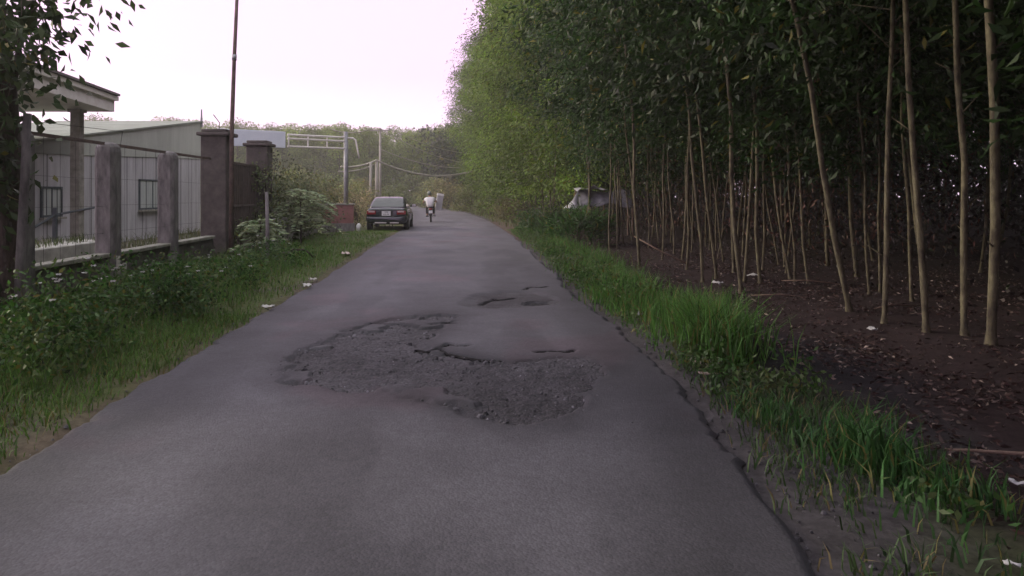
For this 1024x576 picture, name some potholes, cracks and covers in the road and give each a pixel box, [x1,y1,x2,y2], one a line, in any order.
pothole [289,317,604,425]
pothole [473,293,554,309]
